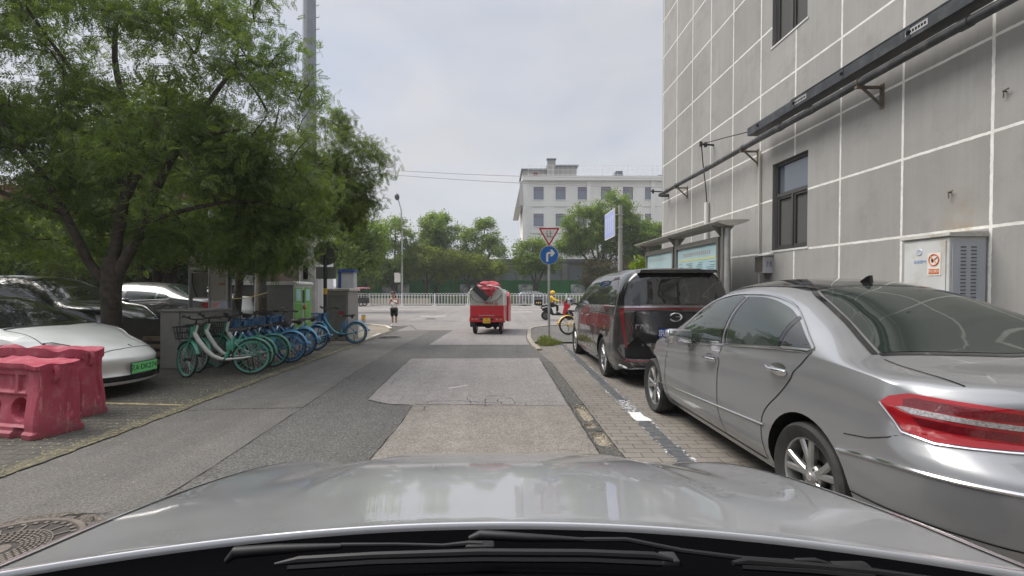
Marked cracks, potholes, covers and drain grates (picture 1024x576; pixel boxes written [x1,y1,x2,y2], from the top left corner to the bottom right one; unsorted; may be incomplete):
manhole cover [0,512,104,563]
crack [371,382,549,411]
